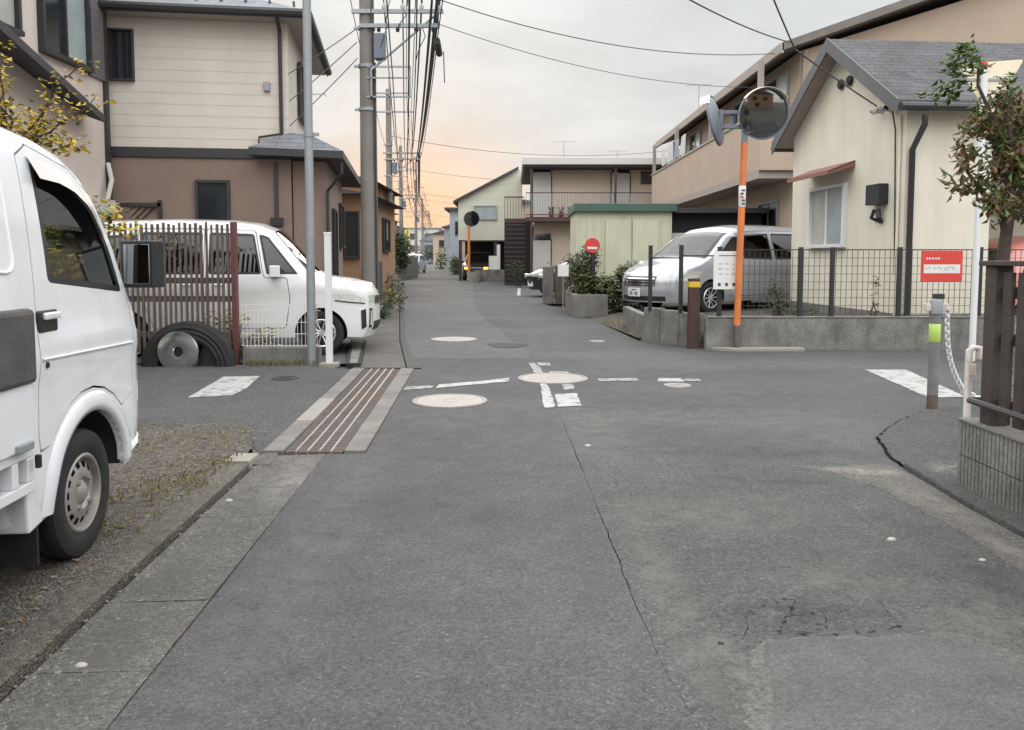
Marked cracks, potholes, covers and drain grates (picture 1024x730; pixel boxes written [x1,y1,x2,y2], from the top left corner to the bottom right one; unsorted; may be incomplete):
drain grate [263,368,422,455]
manhole cover [518,373,588,384]
crack [875,411,922,463]
crack [730,598,904,663]
manhole cover [412,394,487,408]
